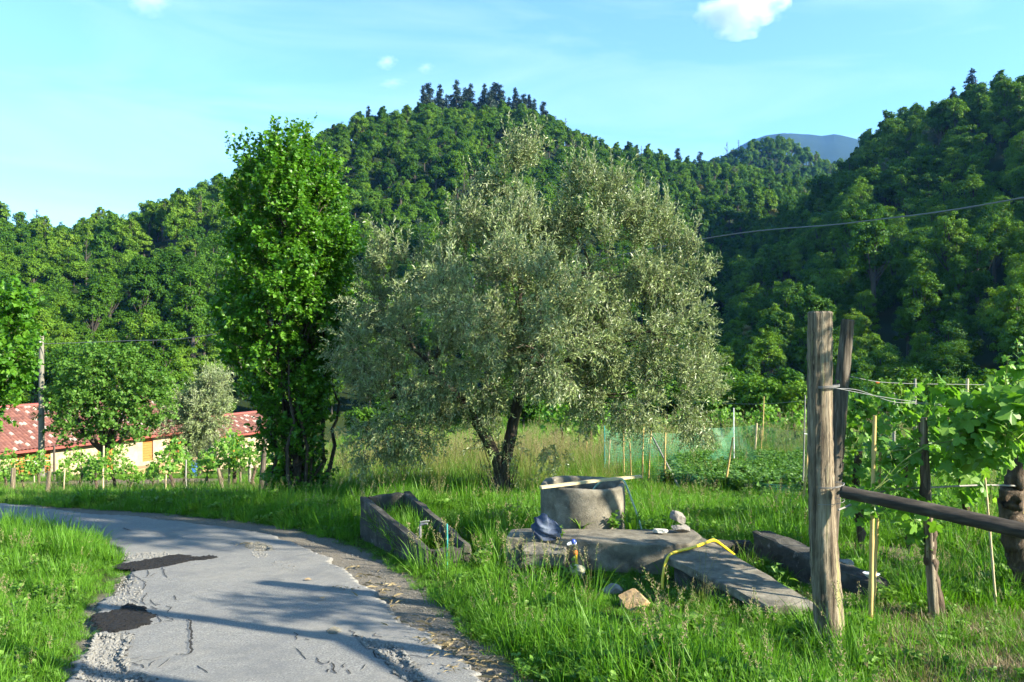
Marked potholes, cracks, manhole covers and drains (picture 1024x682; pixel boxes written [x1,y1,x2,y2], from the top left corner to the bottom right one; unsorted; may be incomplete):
pothole [245,541,274,551]
crack [293,630,382,674]
crack [123,567,208,673]
